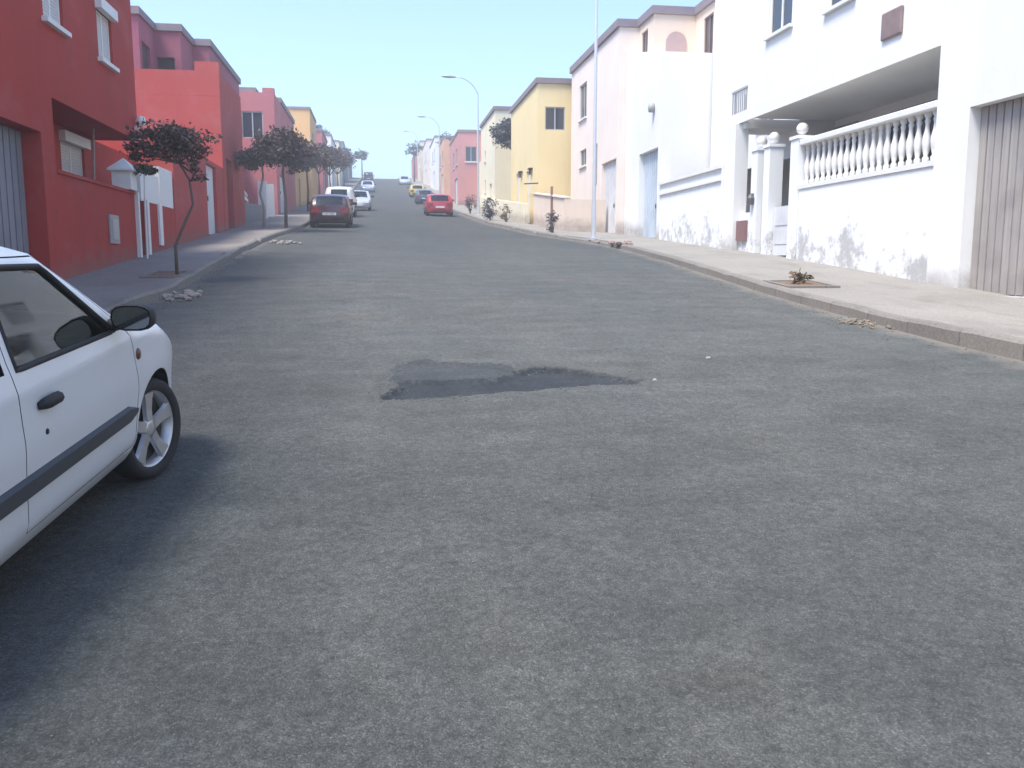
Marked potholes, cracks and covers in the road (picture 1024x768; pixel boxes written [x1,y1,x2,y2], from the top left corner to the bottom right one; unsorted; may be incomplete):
pothole [368,355,658,403]
